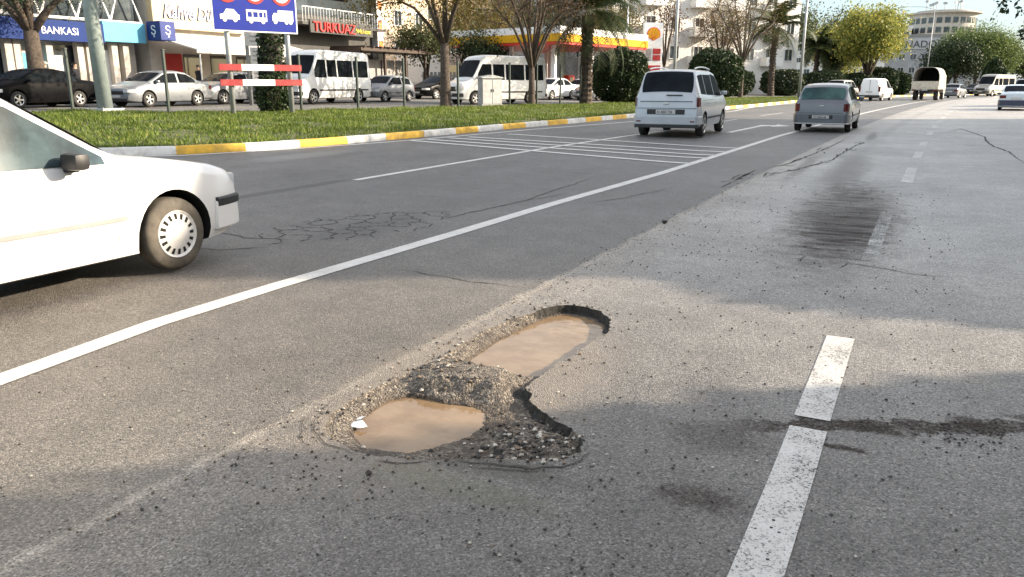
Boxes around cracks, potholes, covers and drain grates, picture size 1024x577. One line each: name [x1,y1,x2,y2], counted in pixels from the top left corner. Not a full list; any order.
crack [201,181,581,250]
crack [722,140,864,187]
crack [954,129,1024,163]
crack [800,254,955,278]
pothole [299,303,615,472]
